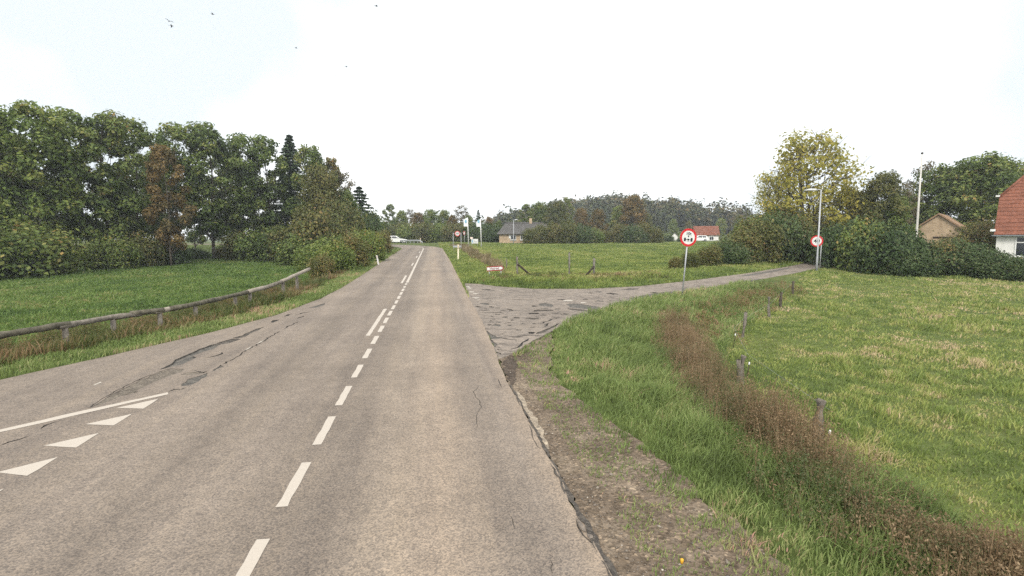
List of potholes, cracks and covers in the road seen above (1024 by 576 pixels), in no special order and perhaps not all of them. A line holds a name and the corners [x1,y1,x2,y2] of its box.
crack [473,380,618,576]
crack [478,299,563,355]
